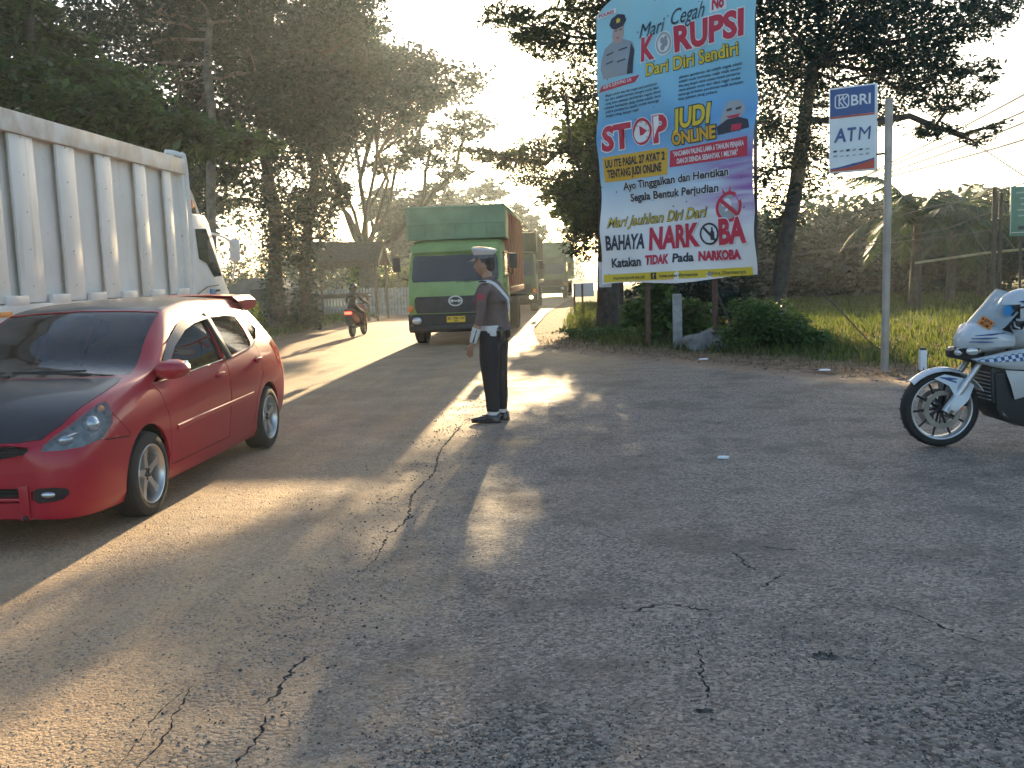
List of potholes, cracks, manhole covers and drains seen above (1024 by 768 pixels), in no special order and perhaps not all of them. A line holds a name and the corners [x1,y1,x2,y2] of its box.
pothole [812,651,840,661]
crack [732,546,795,587]
crack [235,652,312,768]
crack [119,686,192,768]
crack [352,414,478,582]
crack [696,647,710,699]
crack [887,605,993,642]
crack [631,602,723,612]
